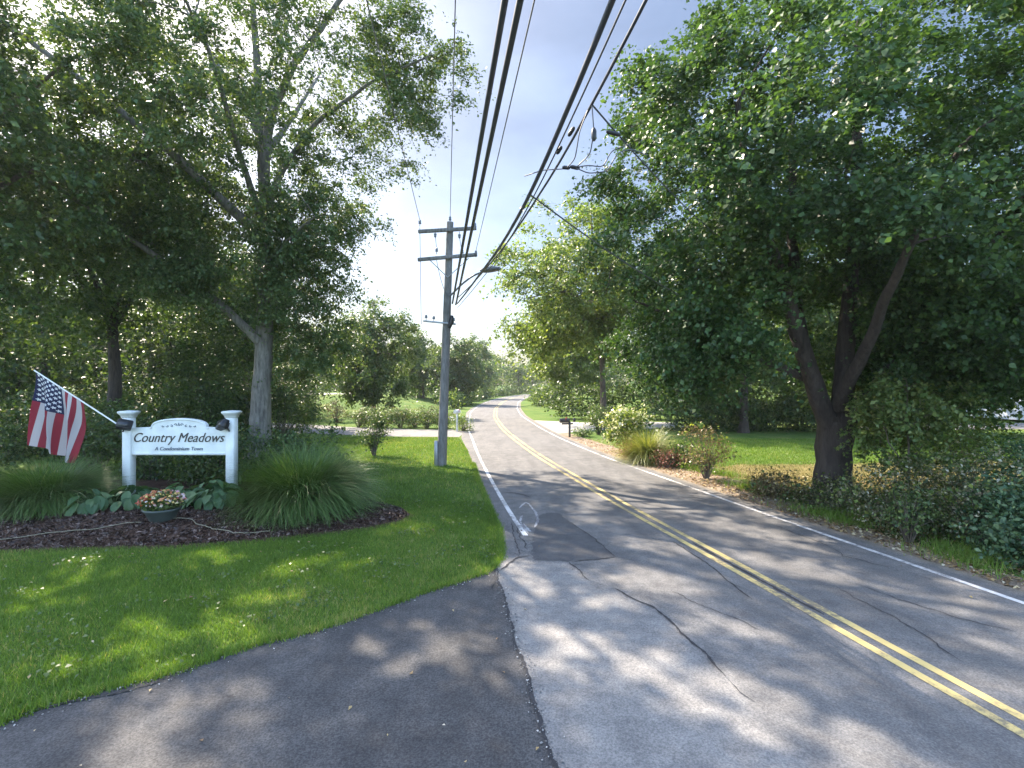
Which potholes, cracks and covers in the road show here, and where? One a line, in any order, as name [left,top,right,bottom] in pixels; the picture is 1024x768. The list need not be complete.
crack [511,523,528,556]
crack [569,525,1013,706]
